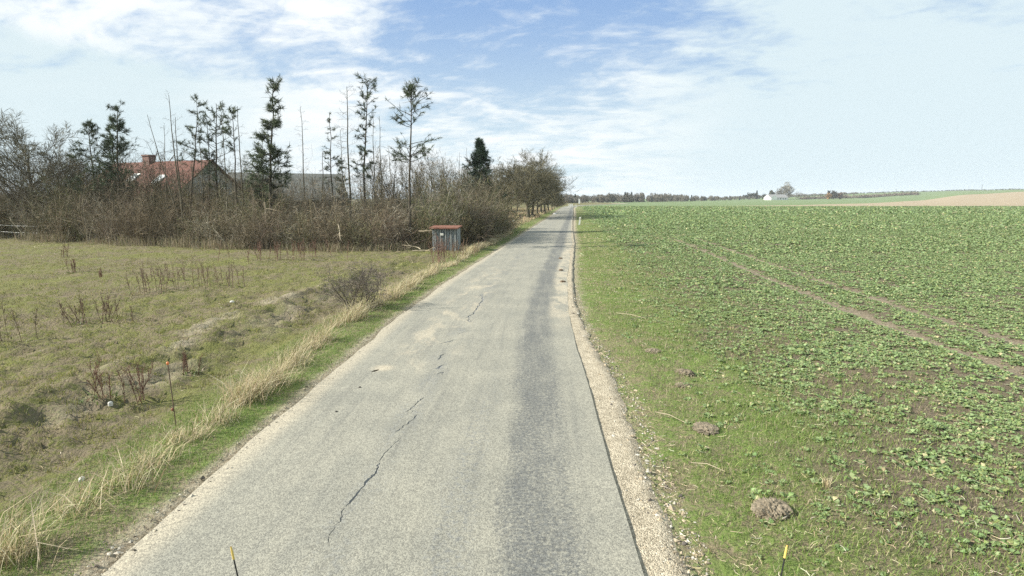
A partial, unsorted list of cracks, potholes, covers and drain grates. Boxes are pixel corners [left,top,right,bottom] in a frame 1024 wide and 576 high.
crack [327,398,423,544]
crack [430,295,484,379]
